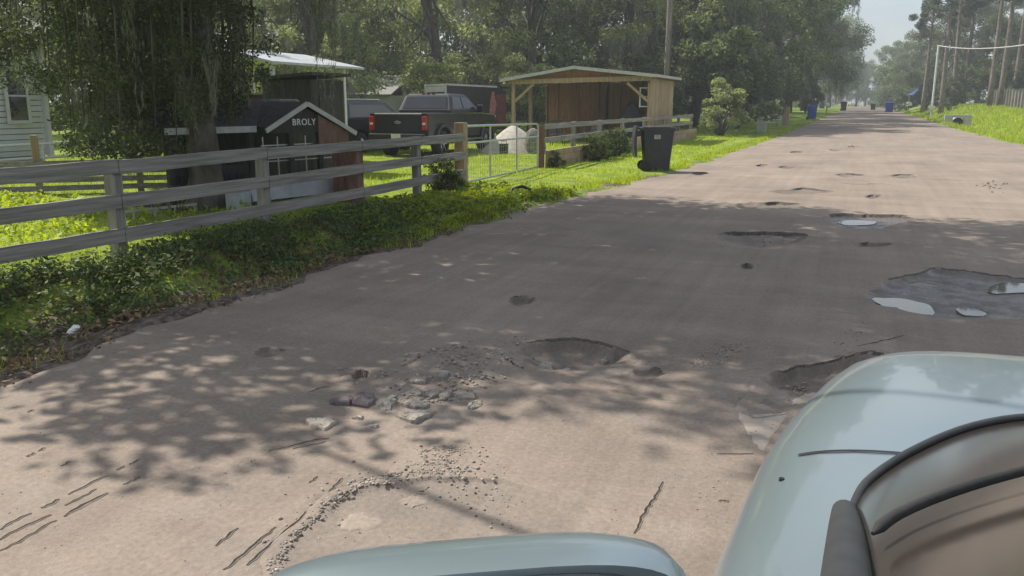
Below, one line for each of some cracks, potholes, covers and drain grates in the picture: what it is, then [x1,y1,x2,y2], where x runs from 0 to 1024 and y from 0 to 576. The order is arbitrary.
pothole [850,267,1024,325]
pothole [700,231,815,251]
crack [215,511,307,570]
pothole [734,349,888,419]
pothole [752,187,844,195]
crack [0,447,141,551]
pothole [817,212,918,230]
pothole [620,365,672,384]
crack [269,438,329,452]
pothole [490,336,638,374]
crack [633,481,664,533]
pothole [498,294,541,308]
